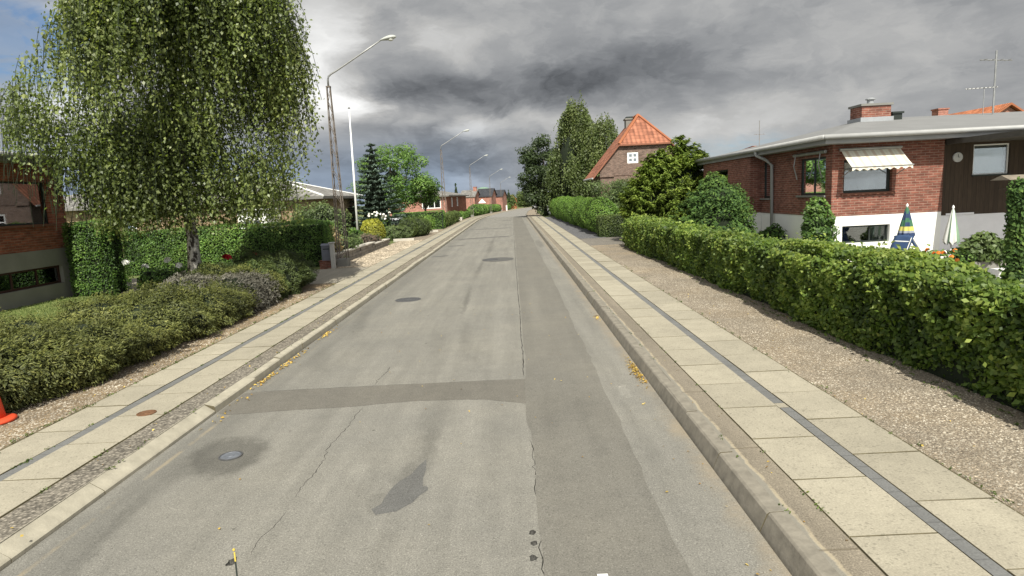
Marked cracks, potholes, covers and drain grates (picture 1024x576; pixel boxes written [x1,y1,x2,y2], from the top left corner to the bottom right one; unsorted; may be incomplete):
manhole cover [218,451,243,461]
